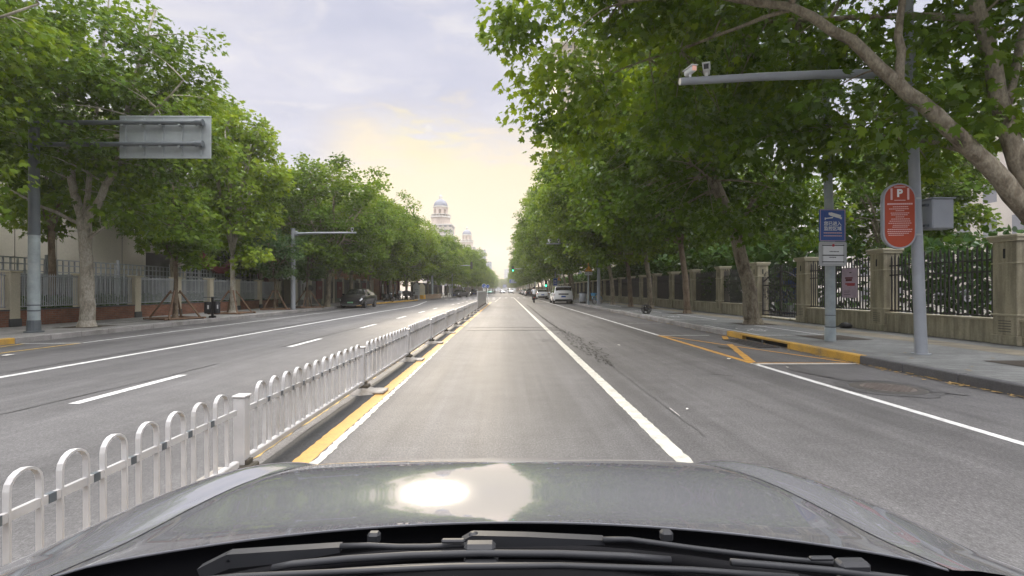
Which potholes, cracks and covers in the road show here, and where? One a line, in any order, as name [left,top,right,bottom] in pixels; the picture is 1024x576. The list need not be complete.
crack [537,327,614,367]
drain grate [722,339,779,348]
manhole cover [834,379,948,398]
